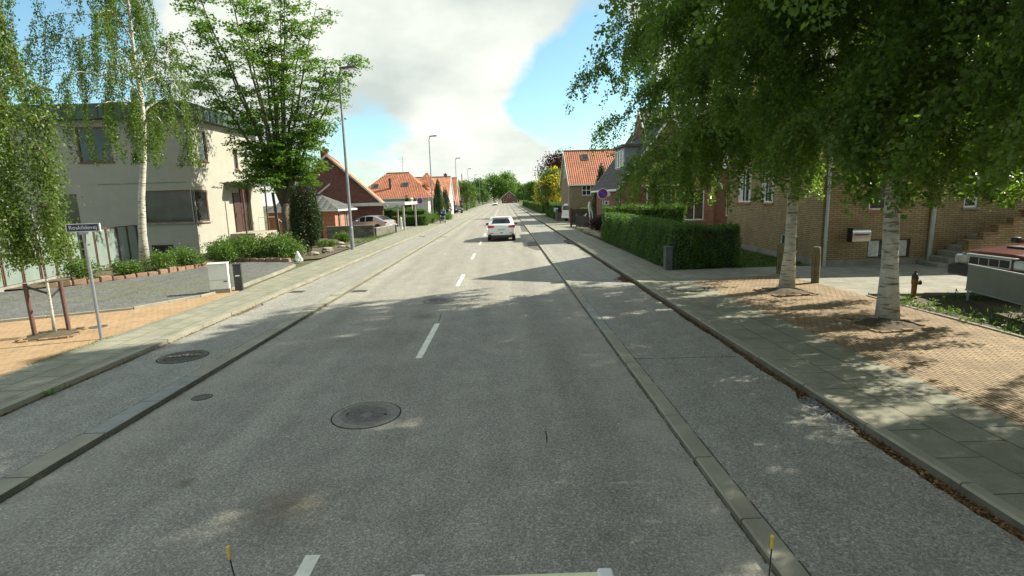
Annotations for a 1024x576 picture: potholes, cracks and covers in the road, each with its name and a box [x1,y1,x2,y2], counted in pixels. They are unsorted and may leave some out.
manhole cover [331,402,401,429]
pothole [795,396,859,429]
manhole cover [156,350,209,364]
